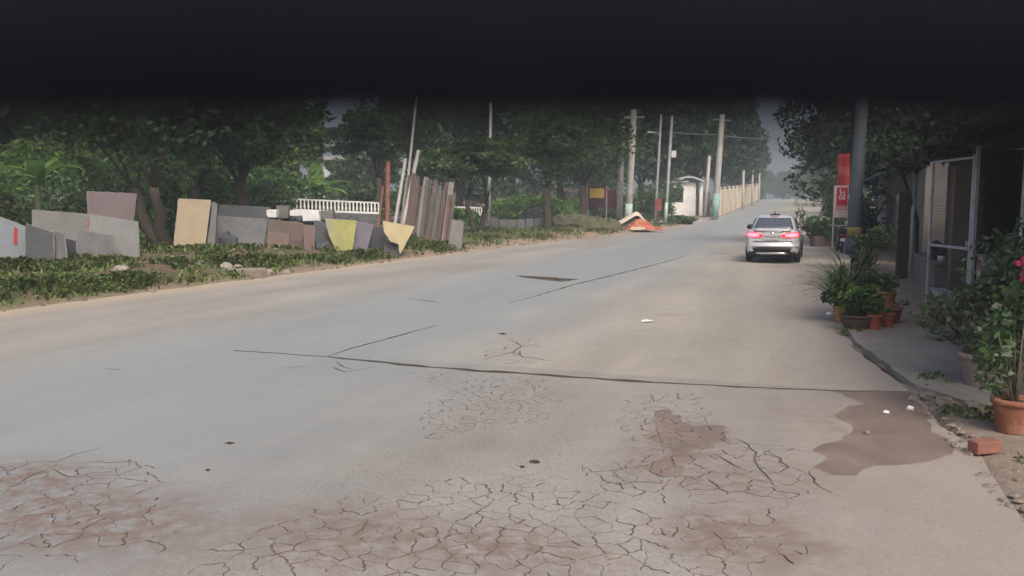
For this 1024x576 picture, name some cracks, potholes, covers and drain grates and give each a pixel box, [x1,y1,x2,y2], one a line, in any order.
crack [483,338,549,364]
crack [189,474,812,576]
crack [581,389,832,505]
crack [287,326,433,372]
crack [0,447,177,570]
crack [414,371,562,439]
